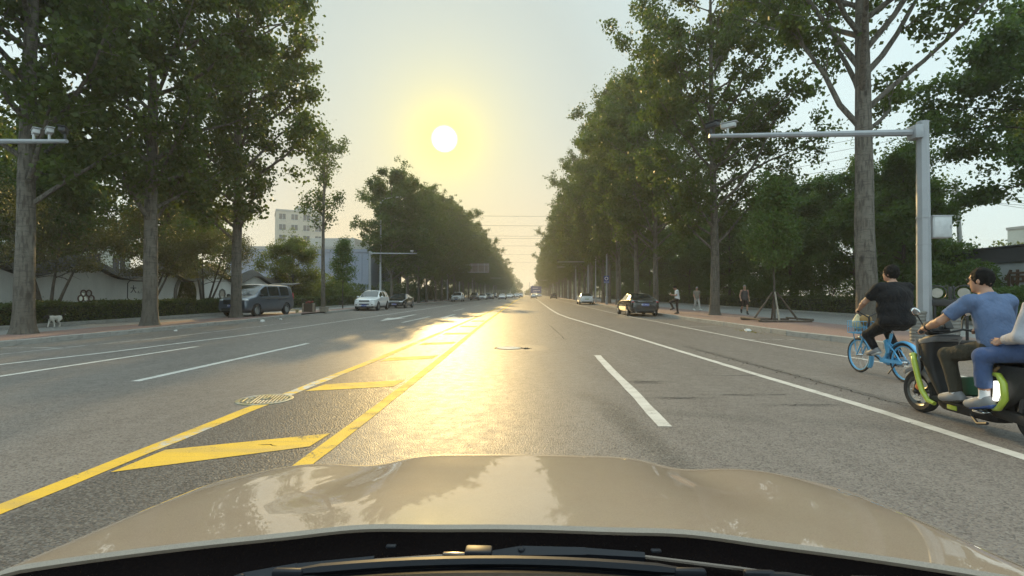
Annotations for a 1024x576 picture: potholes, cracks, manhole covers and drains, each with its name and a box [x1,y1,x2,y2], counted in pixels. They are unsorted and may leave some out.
manhole cover [235,394,294,406]
